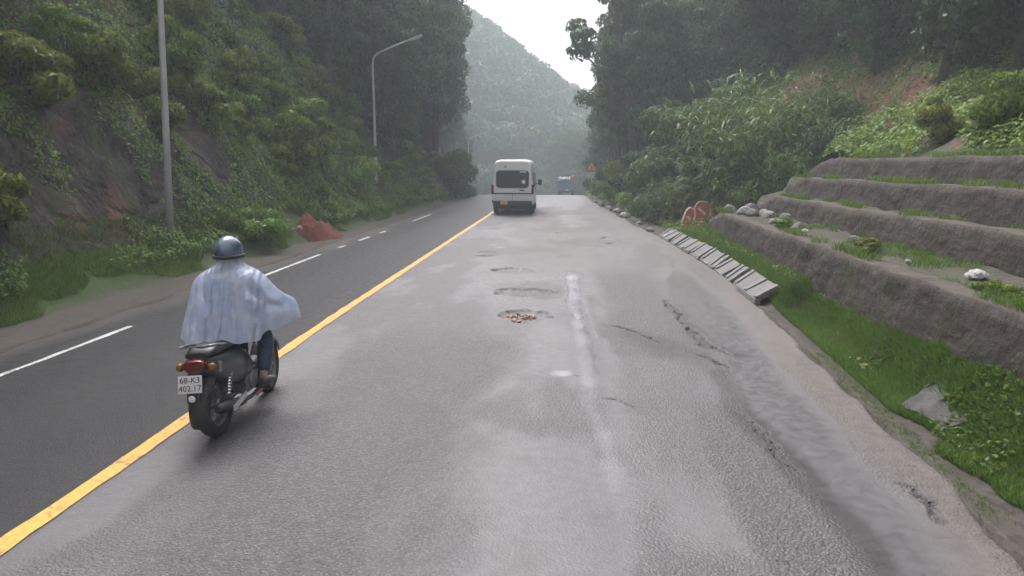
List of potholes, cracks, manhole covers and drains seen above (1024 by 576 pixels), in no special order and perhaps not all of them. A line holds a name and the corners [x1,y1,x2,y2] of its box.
crack [868,472,972,539]
pothole [465,249,508,258]
pothole [485,306,566,327]
pothole [478,286,569,299]
crack [593,298,750,372]
pothole [478,265,549,276]
crack [723,408,828,487]
crack [589,392,668,414]
